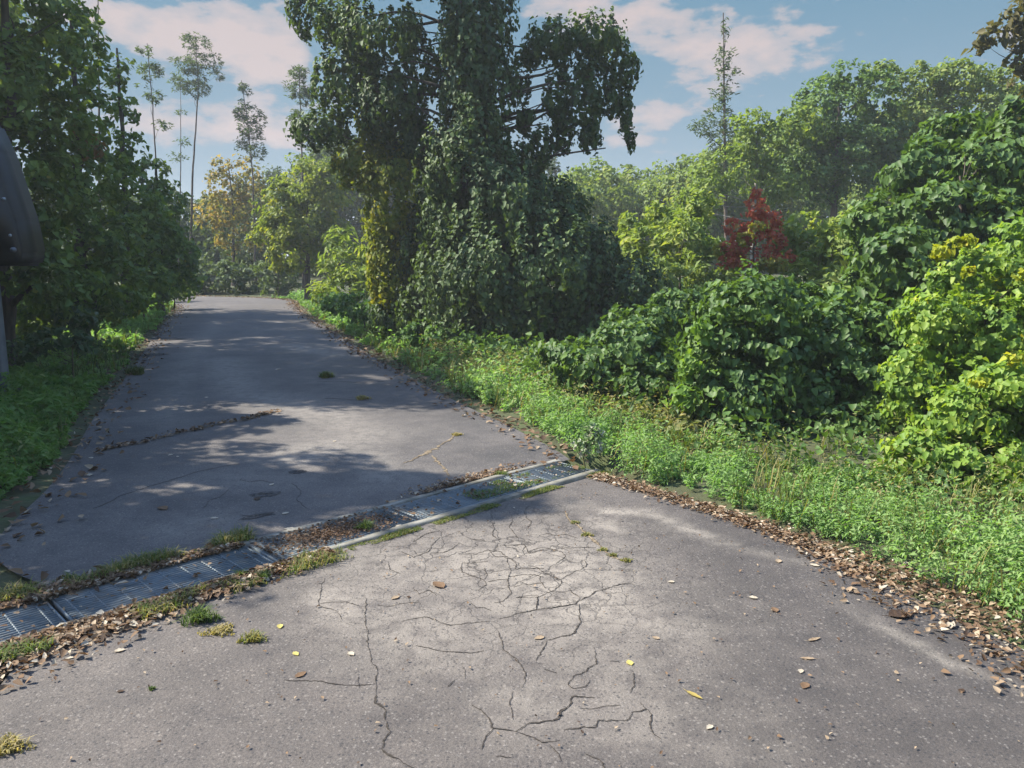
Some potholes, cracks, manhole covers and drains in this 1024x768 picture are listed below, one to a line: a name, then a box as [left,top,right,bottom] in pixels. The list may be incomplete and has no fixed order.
drain grate [51,546,274,622]
crack [288,505,661,768]
drain grate [249,507,423,562]
crack [403,435,456,476]
drain grate [0,600,67,642]
drain grate [394,477,535,519]
drain grate [505,462,591,486]
